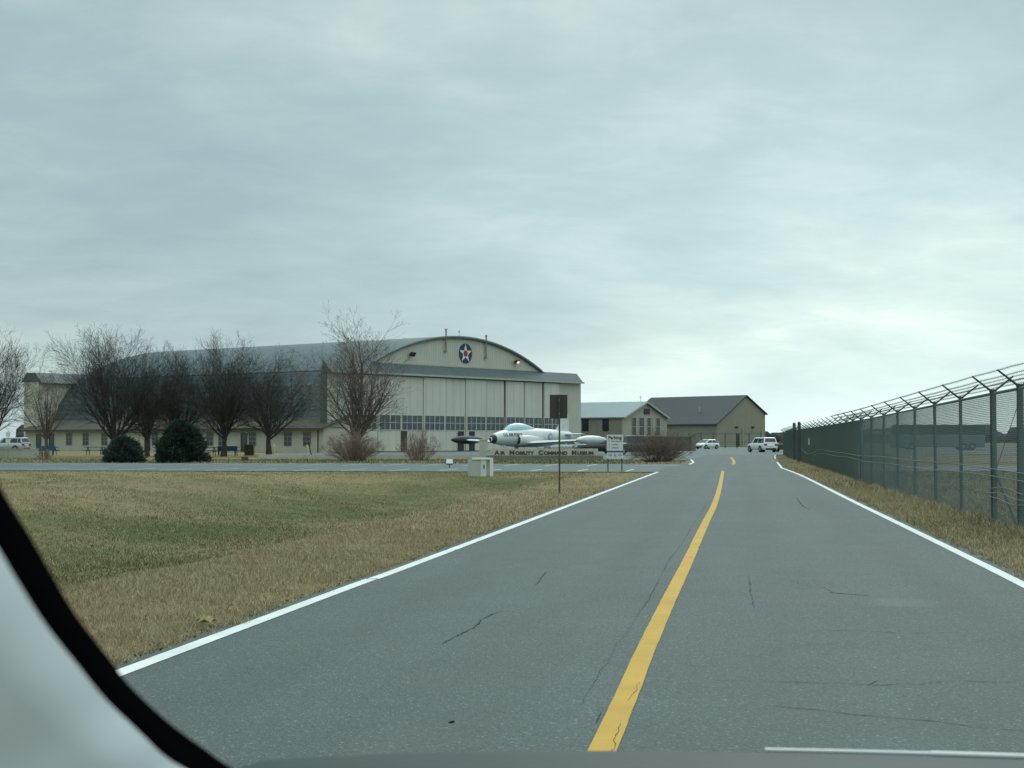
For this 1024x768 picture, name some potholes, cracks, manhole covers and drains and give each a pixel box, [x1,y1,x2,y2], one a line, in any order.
crack [581,502,708,751]
